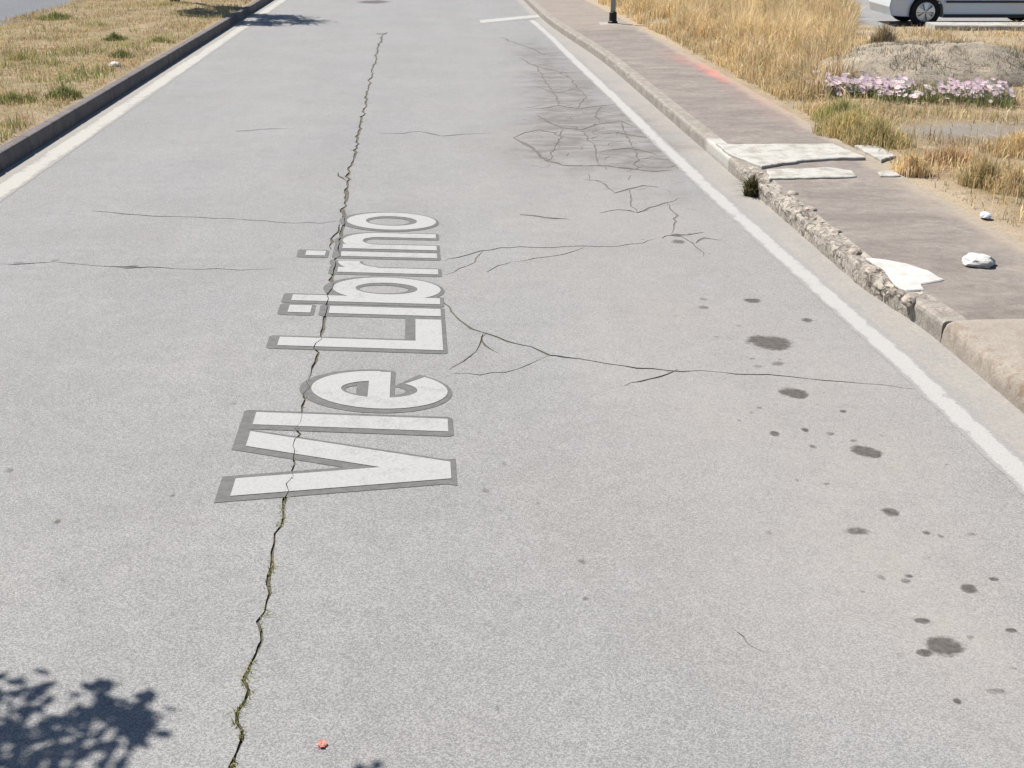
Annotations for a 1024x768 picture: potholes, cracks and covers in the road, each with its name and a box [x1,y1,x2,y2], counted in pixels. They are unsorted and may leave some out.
crack [445,37,717,275]
crack [443,297,911,389]
crack [11,262,257,270]
crack [98,33,483,768]
